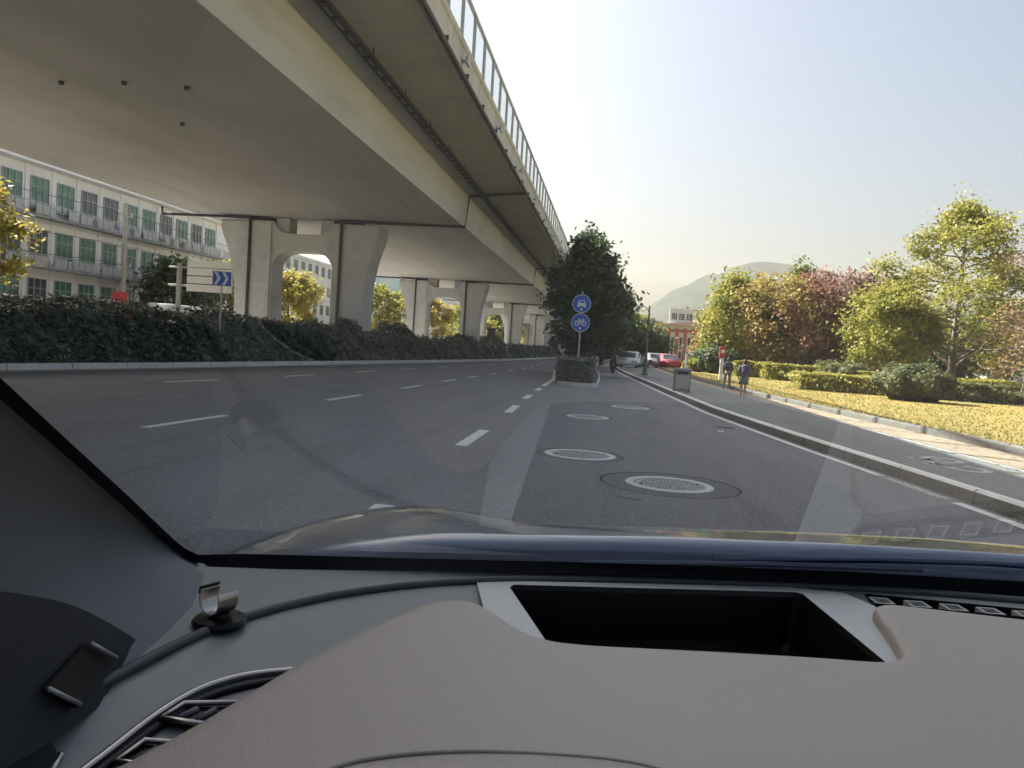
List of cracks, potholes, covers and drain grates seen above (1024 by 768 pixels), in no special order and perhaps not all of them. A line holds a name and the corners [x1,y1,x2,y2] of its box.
manhole cover [537,448,623,462]
manhole cover [600,472,742,499]
